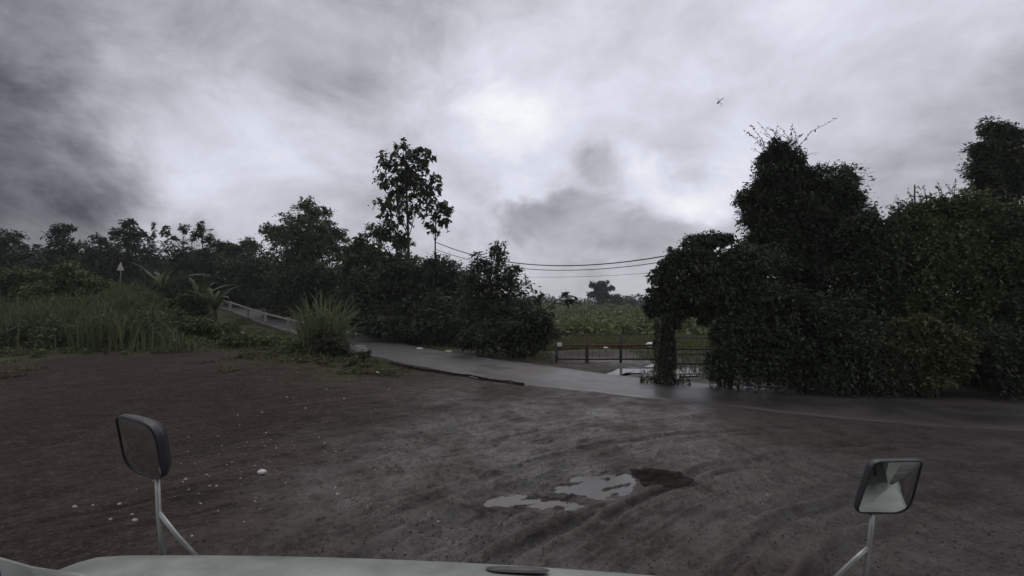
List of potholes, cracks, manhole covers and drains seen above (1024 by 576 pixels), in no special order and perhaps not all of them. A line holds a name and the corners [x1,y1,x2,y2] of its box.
pothole [629,468,694,489]
pothole [541,467,646,507]
pothole [470,488,600,520]
